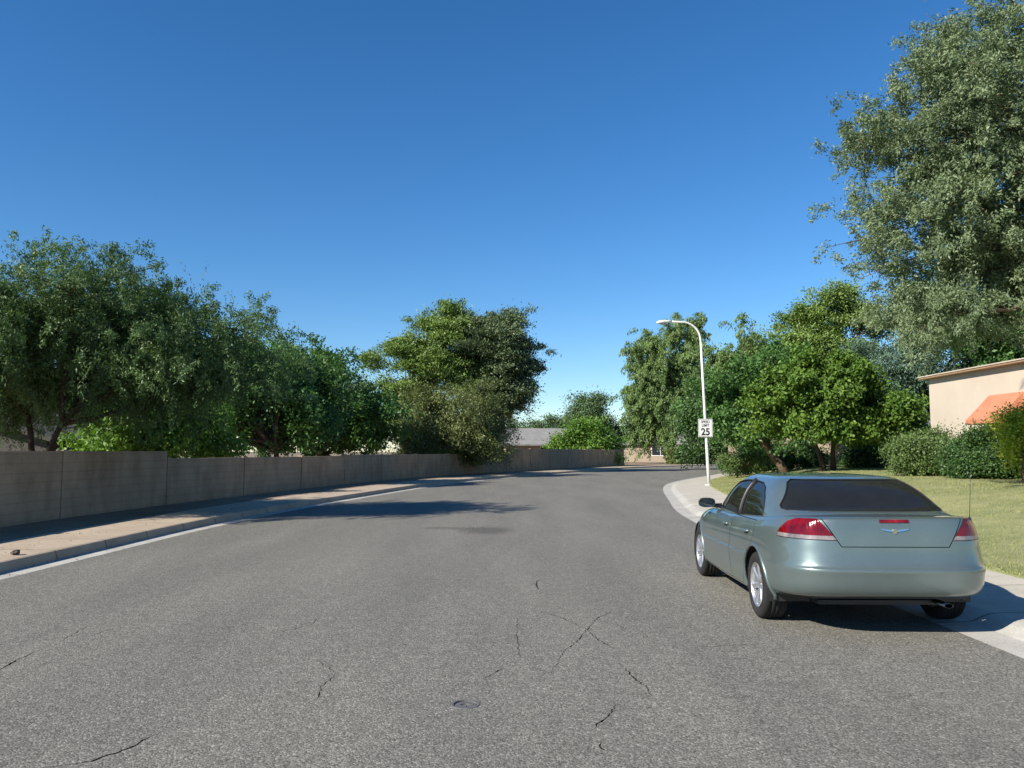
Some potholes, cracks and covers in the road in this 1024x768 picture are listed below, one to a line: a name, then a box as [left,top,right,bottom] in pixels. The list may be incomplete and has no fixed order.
crack [594,704,616,751]
crack [536,609,615,675]
utility cover [451,699,480,709]
crack [42,726,172,768]
